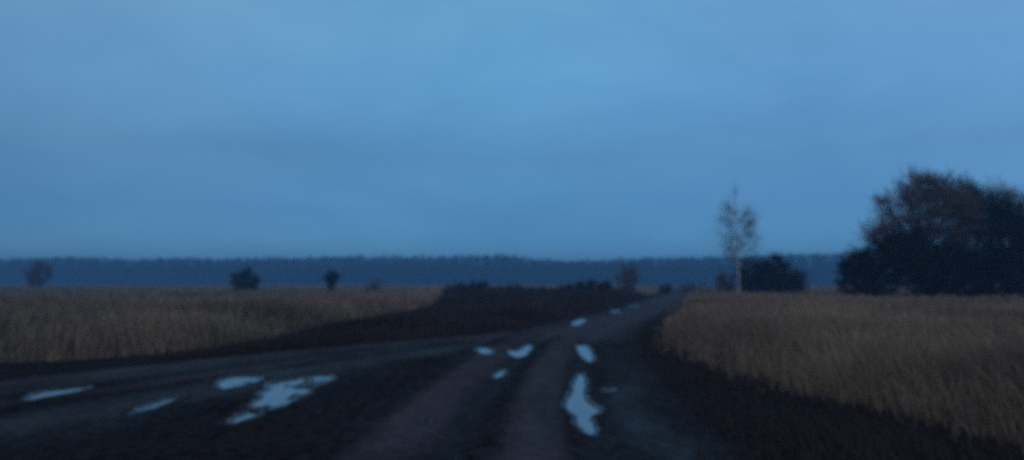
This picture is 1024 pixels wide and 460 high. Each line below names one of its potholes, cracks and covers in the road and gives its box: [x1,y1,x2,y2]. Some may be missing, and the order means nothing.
pothole [16,385,98,402]
pothole [487,369,511,379]
pothole [236,374,341,413]
pothole [572,344,599,363]
pothole [208,375,271,390]
pothole [119,394,194,416]
pothole [557,372,610,438]
pothole [471,347,497,355]
pothole [506,344,537,358]
pothole [216,406,273,426]
